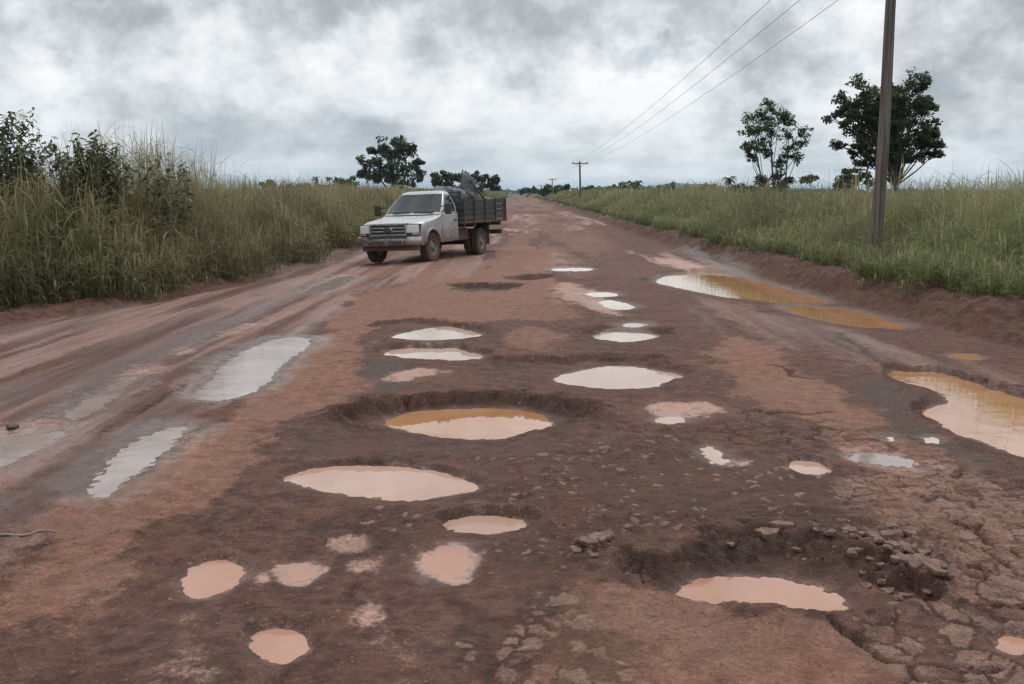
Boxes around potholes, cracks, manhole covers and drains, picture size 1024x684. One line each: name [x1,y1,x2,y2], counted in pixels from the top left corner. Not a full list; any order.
crack [844,473,1024,629]
pothole [431,505,553,547]
pothole [232,617,321,670]
pothole [777,457,843,477]
pothole [485,351,707,396]
pothole [364,317,502,349]
pothole [265,456,491,508]
crack [825,612,1007,684]
pothole [363,341,497,365]
pothole [267,387,626,459]
pothole [164,553,262,608]
pothole [869,361,1024,467]
